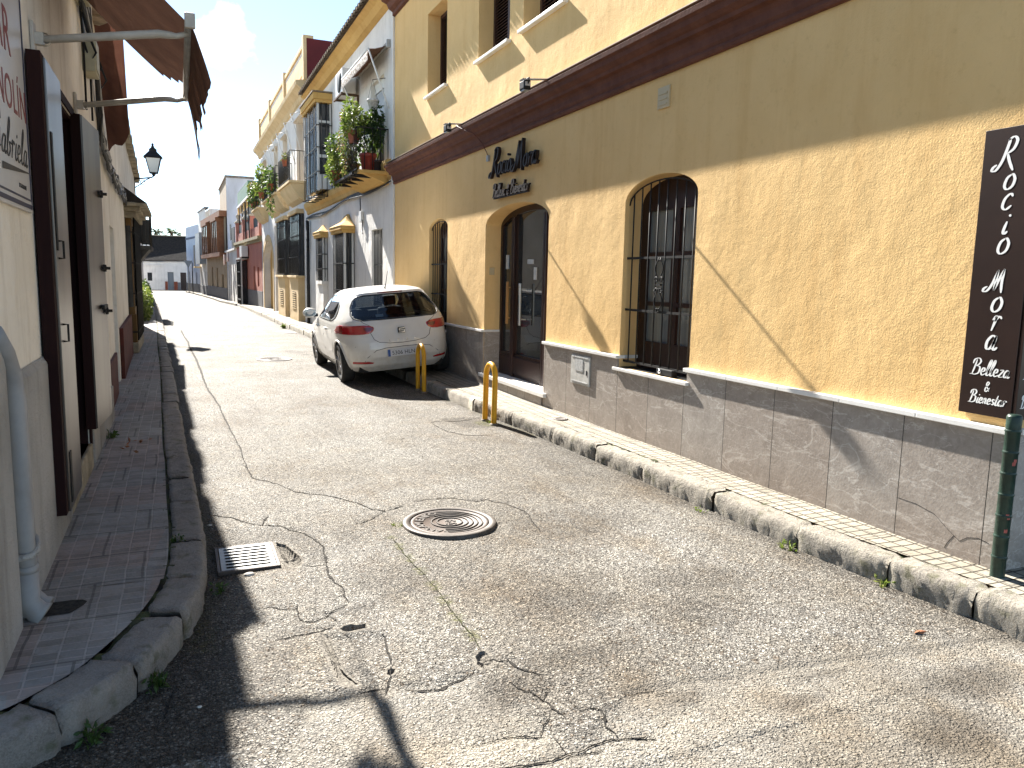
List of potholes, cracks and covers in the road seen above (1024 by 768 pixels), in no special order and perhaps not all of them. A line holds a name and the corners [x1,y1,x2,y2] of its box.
drain grate [214,542,281,576]
crack [210,514,348,641]
crack [181,330,401,524]
crack [363,539,671,768]
manhole cover [402,507,496,540]
pothole [272,541,309,569]
pothole [332,620,375,638]
pothole [466,646,503,673]
crack [417,498,541,532]
